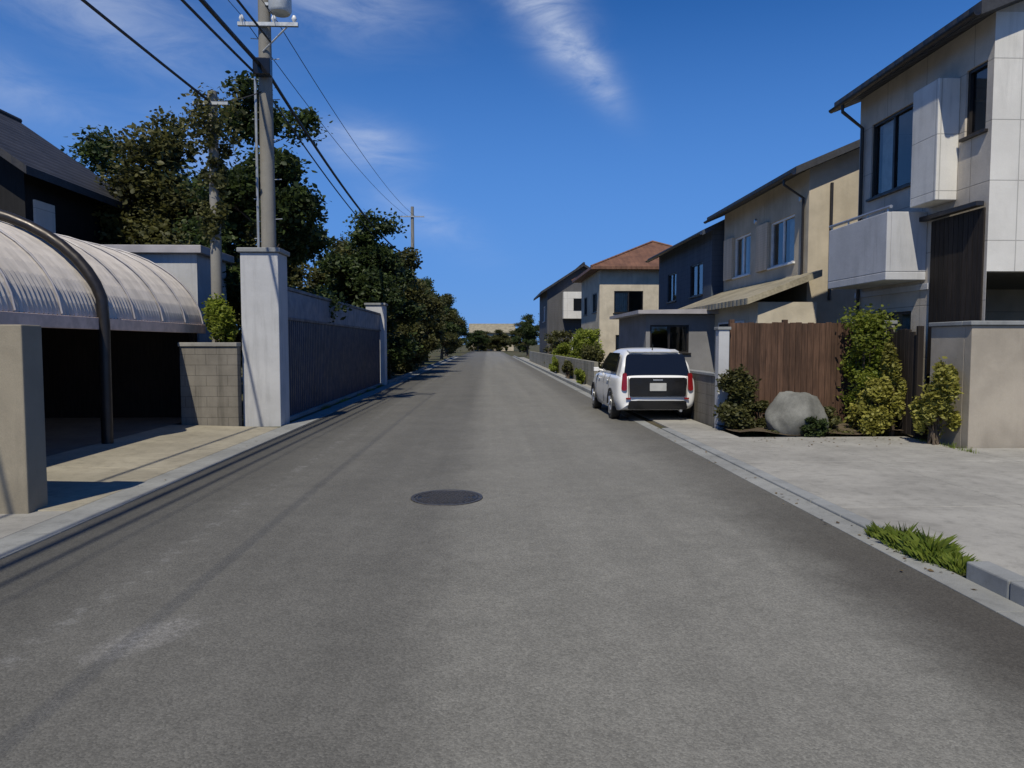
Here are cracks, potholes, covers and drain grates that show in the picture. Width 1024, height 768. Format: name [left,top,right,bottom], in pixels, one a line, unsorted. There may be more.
manhole cover [411,489,483,506]
